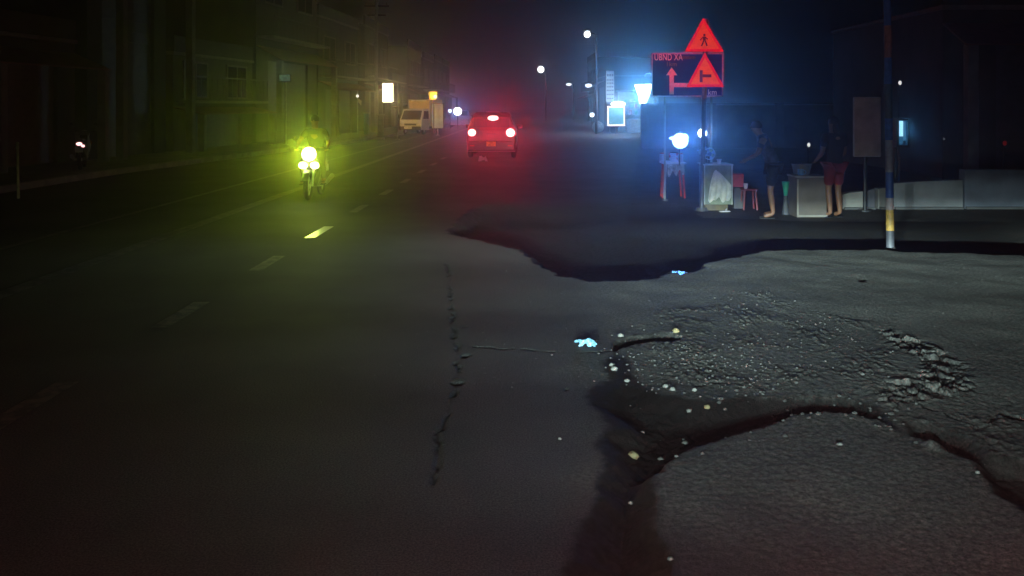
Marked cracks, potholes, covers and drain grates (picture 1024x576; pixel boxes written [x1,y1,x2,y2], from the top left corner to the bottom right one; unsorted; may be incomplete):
pothole [864,327,989,408]
crack [428,263,611,488]
pothole [443,200,1024,282]
